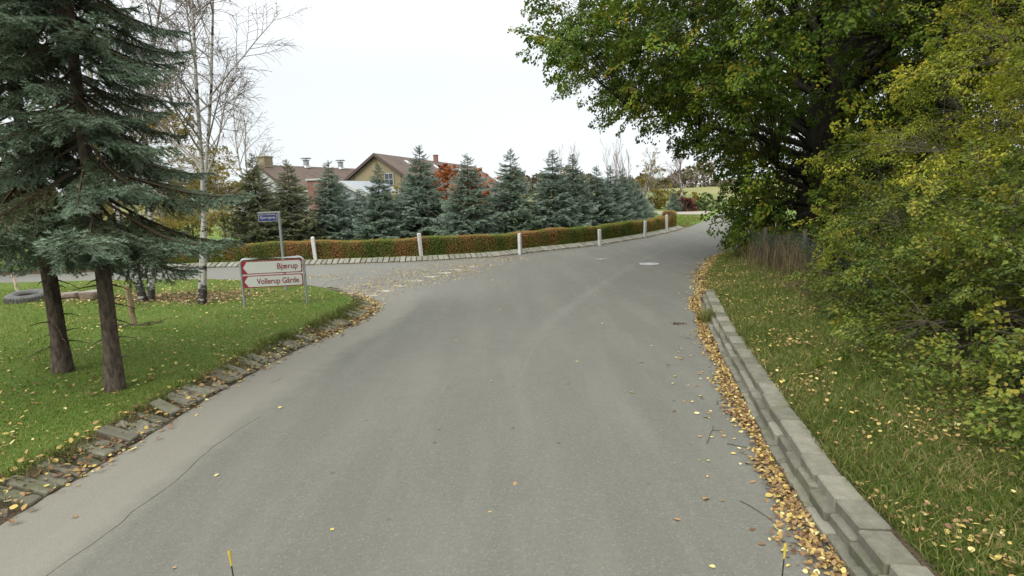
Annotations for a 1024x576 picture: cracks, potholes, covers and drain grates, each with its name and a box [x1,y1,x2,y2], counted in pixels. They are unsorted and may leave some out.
crack [46,417,259,576]
